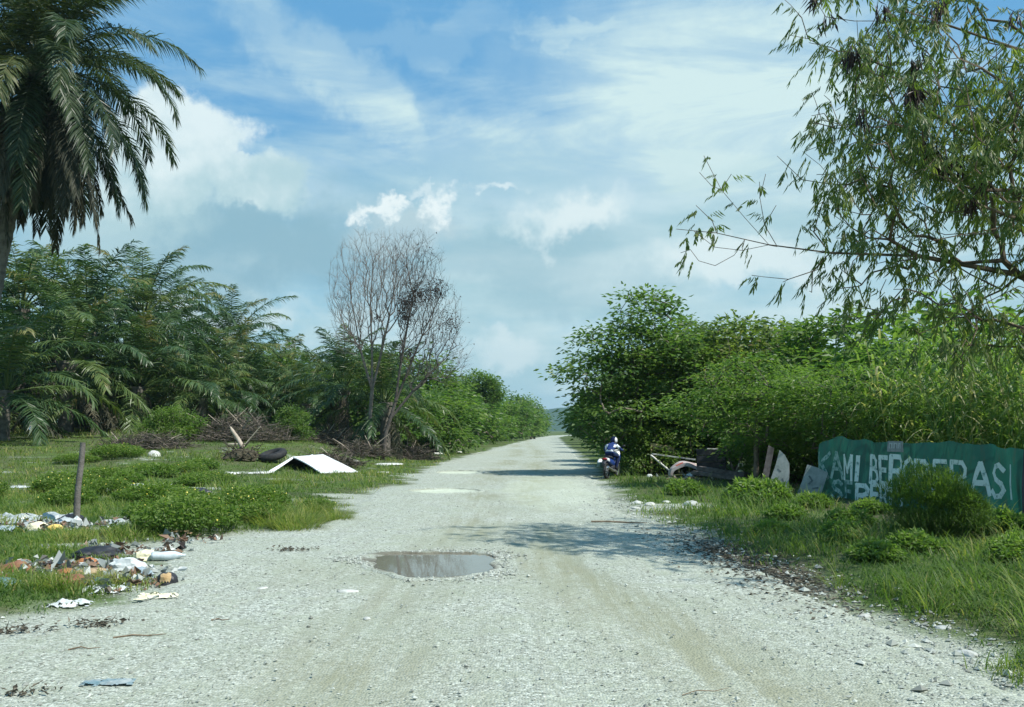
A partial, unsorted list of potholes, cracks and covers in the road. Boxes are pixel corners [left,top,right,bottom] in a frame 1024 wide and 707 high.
pothole [353,551,505,582]
